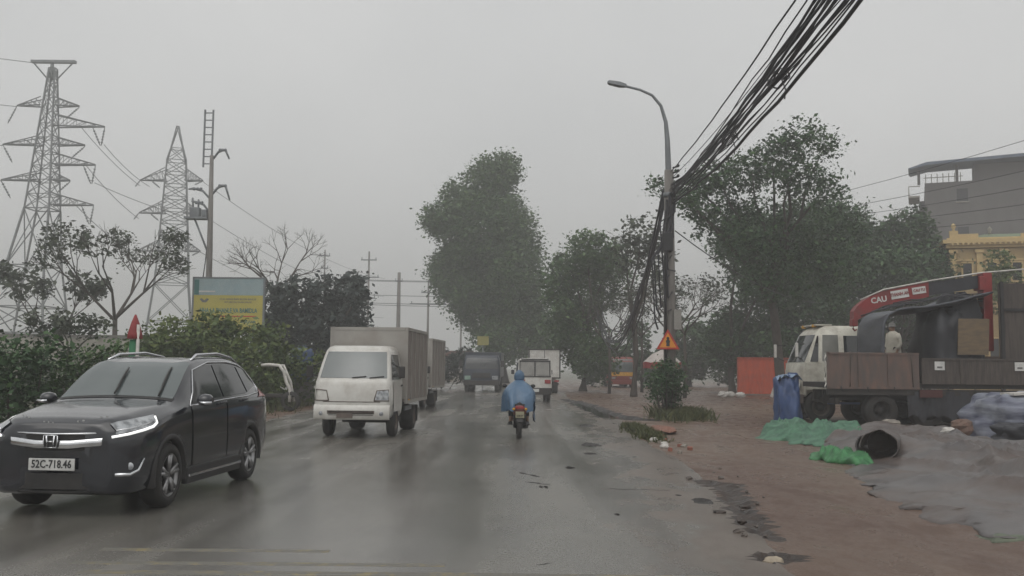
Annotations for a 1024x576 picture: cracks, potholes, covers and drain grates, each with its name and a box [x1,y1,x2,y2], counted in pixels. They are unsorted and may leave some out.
pothole [693,480,787,542]
pothole [746,551,815,565]
